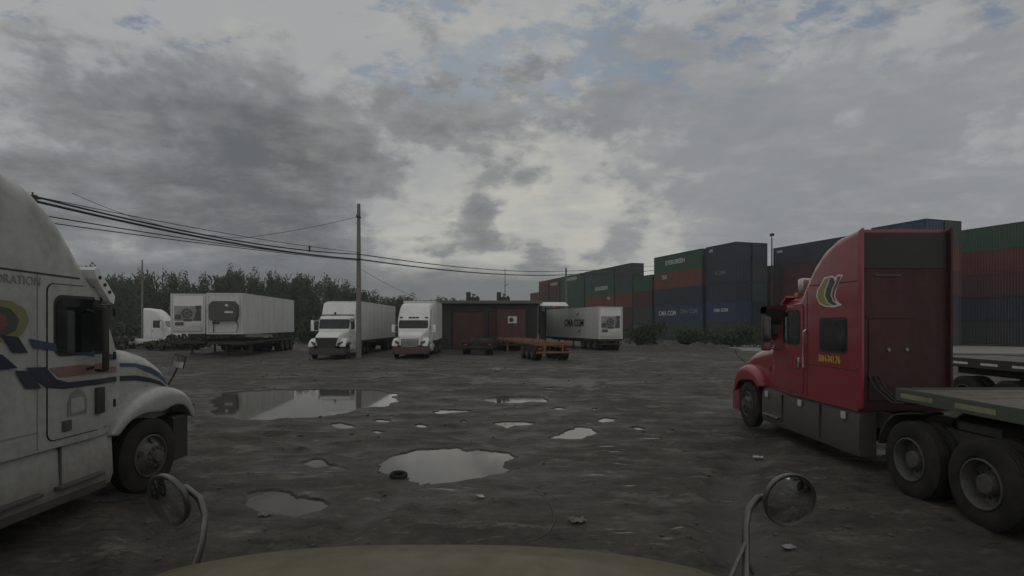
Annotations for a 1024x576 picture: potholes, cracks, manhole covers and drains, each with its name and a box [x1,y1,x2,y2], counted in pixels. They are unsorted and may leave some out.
pothole [375,446,525,486]
pothole [298,457,351,470]
pothole [542,426,600,439]
pothole [241,488,332,517]
pothole [480,395,553,403]
pothole [208,388,402,420]
